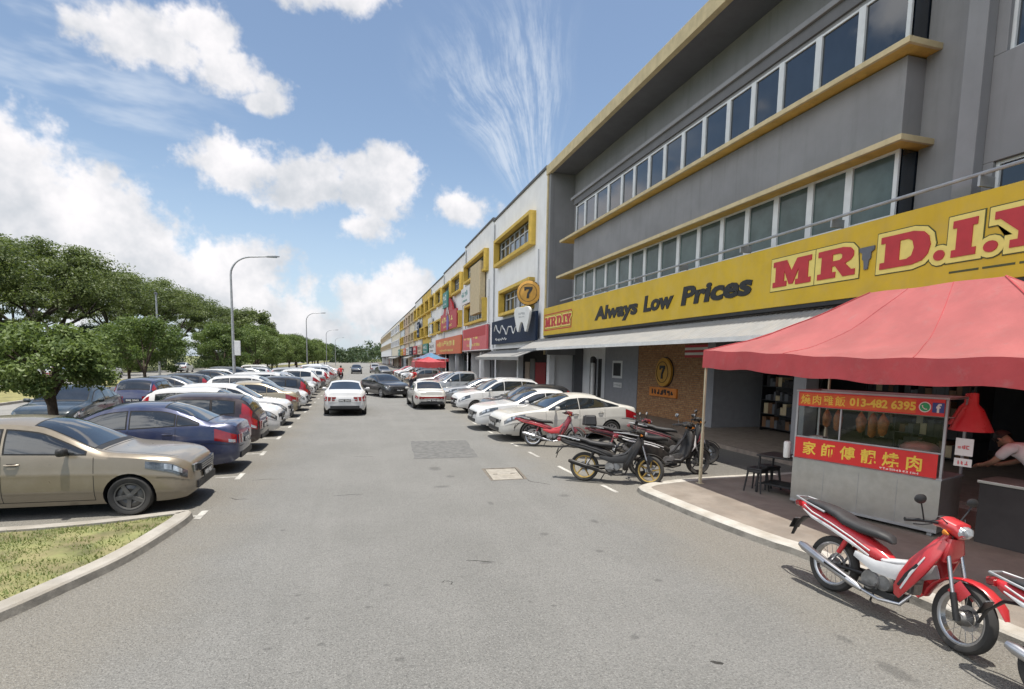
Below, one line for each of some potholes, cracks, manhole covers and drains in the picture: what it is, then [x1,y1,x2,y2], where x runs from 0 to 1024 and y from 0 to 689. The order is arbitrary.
manhole cover [482,467,527,481]
